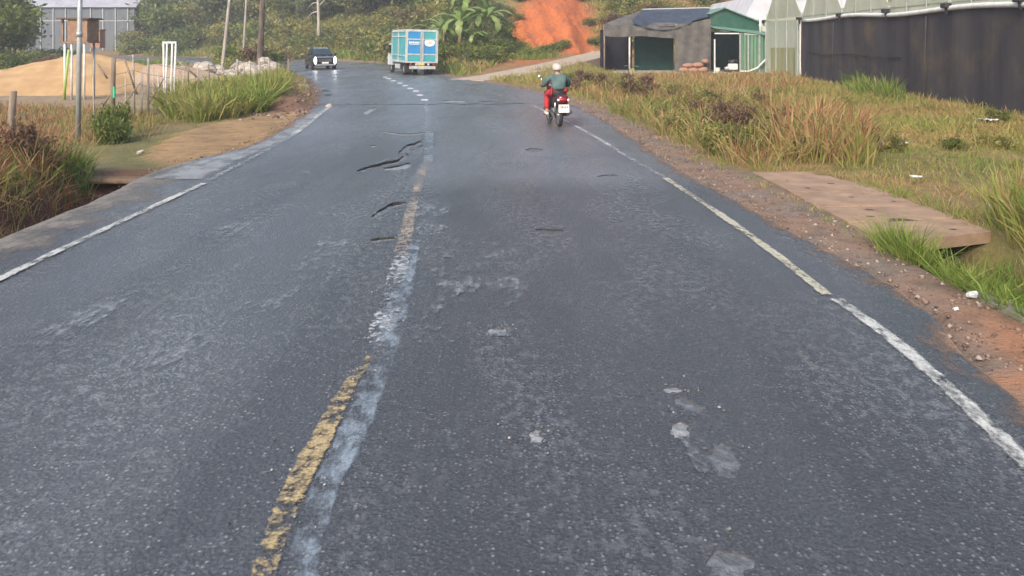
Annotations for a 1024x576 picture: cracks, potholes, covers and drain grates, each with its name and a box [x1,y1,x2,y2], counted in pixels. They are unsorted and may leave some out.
crack [357,131,434,172]
crack [370,202,406,217]
